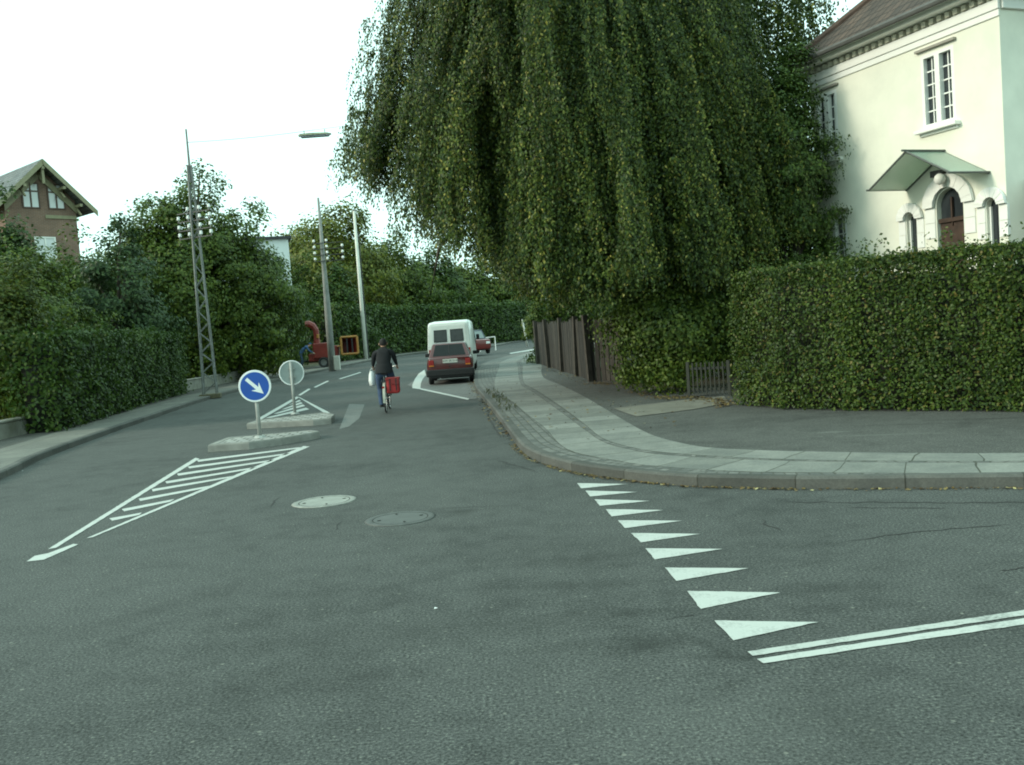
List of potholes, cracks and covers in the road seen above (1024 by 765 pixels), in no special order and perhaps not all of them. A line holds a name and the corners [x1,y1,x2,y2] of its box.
manhole cover [364,511,436,527]
crack [851,524,1008,541]
manhole cover [291,495,357,508]
